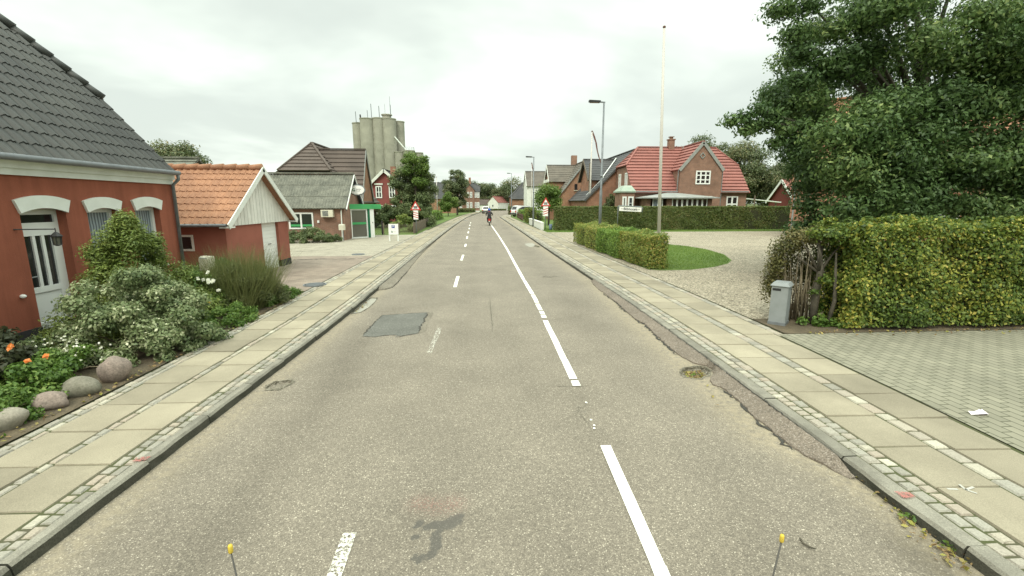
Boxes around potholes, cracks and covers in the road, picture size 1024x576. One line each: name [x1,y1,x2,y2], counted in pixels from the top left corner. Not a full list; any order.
crack [721,389,793,450]
crack [603,293,677,355]
